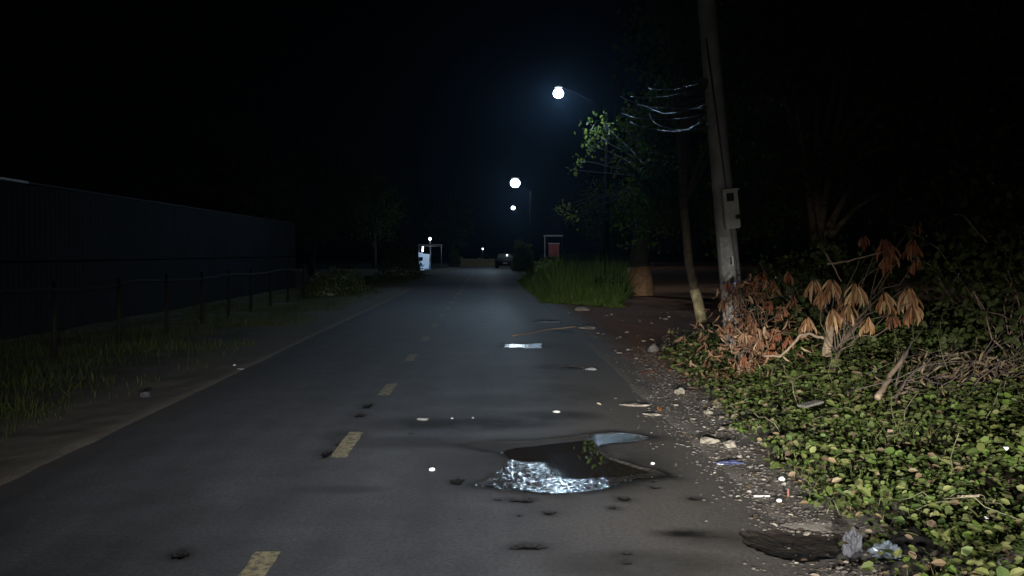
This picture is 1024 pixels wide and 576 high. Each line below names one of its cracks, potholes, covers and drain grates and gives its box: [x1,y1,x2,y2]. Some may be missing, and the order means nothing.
pothole [461,432,668,494]
pothole [739,529,842,564]
pothole [170,550,190,560]
